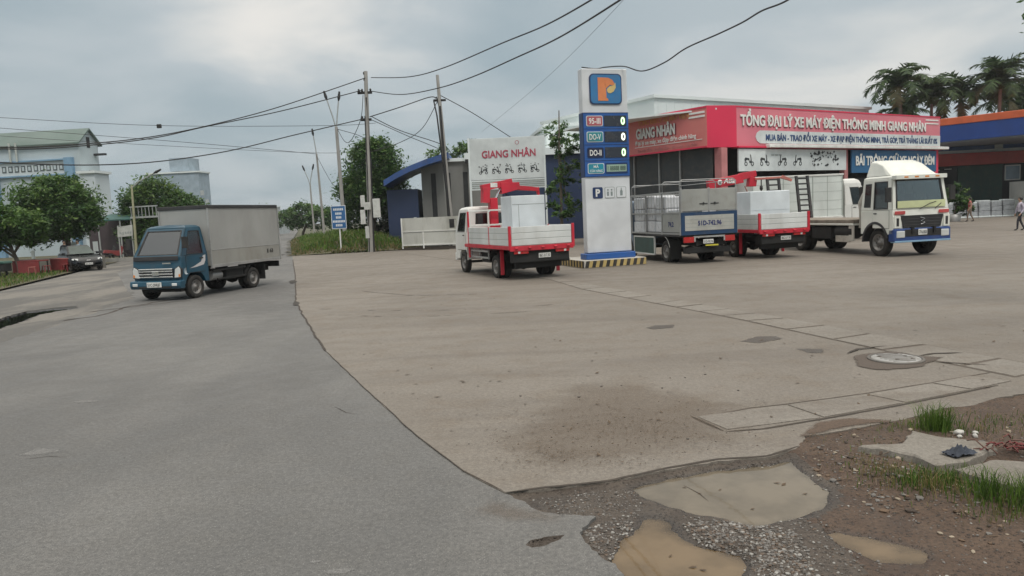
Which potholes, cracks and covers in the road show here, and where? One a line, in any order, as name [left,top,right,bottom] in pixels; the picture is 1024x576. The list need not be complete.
pothole [526,535,564,547]
pothole [597,512,771,576]
pothole [615,453,846,529]
manhole cover [867,353,926,364]
